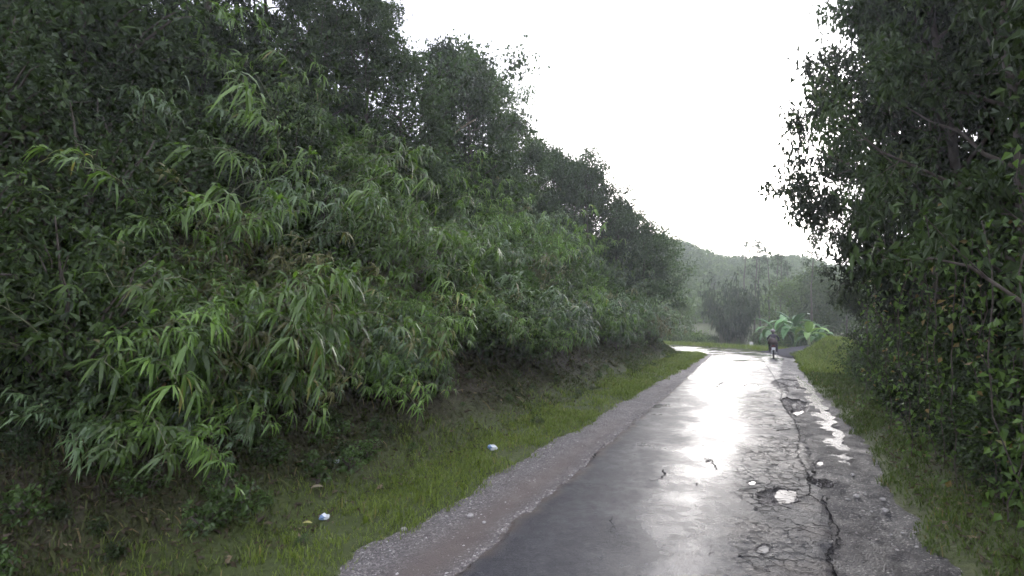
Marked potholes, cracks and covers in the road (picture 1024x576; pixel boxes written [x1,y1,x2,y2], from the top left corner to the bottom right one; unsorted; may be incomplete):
pothole [753,543,772,555]
pothole [754,487,800,506]
pothole [778,397,810,417]
pothole [805,475,837,488]
crack [732,357,842,576]
